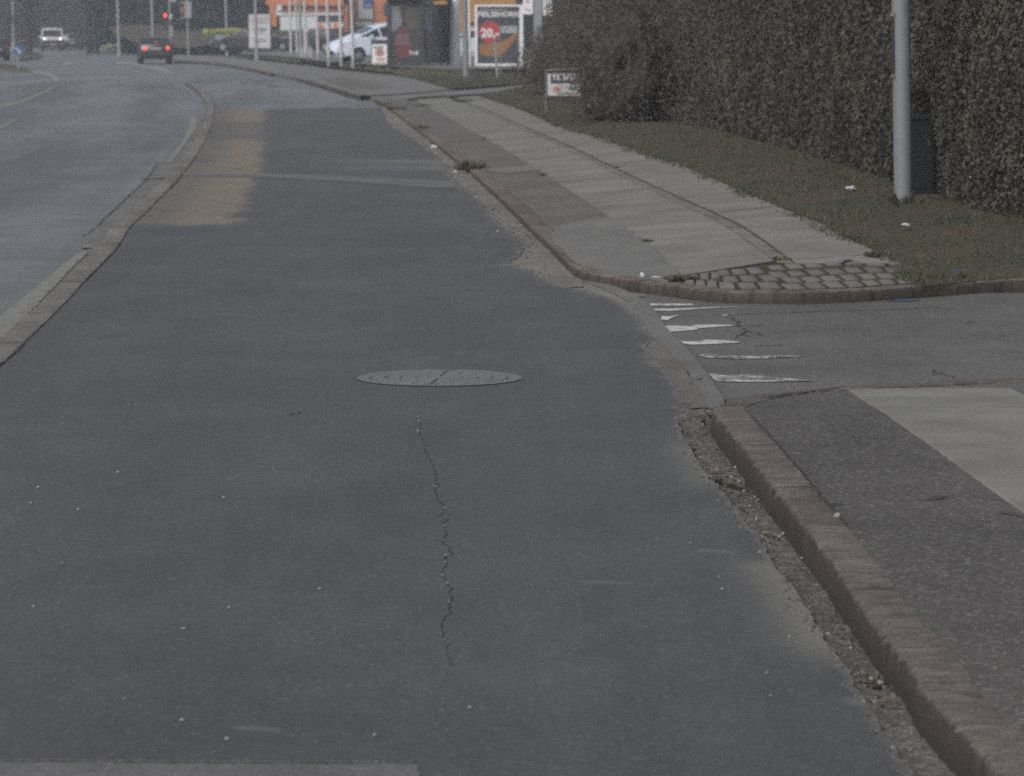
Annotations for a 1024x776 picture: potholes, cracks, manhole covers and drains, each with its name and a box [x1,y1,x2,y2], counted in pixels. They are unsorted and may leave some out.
manhole cover [357,369,522,386]
crack [727,317,780,346]
crack [413,409,453,666]
